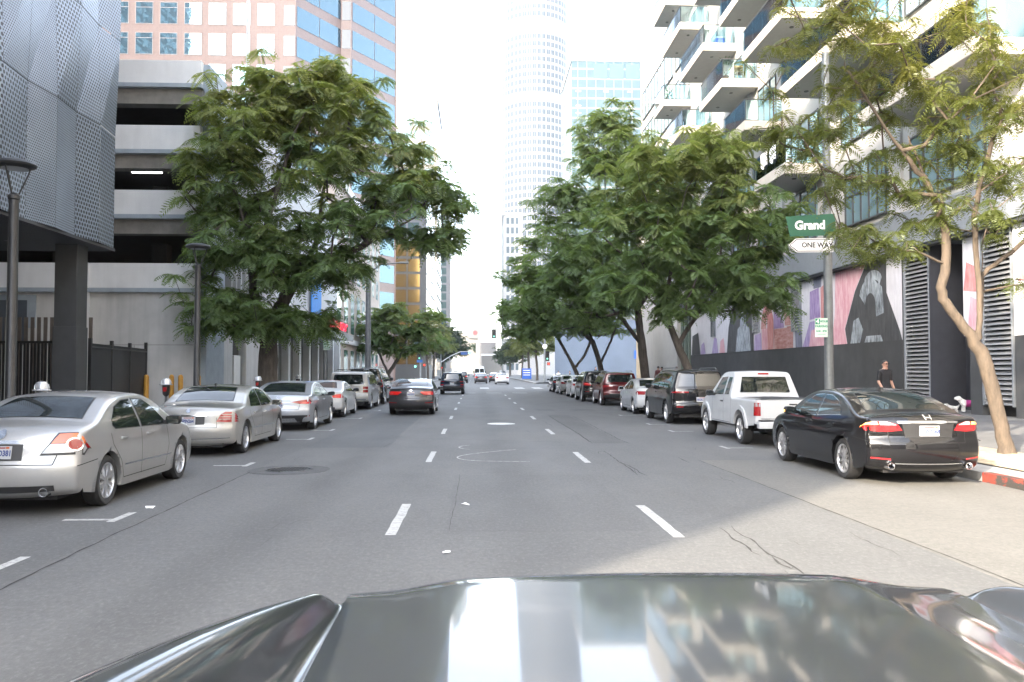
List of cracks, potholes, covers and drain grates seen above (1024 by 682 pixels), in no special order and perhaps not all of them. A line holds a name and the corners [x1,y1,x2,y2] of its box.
manhole cover [247,465,330,475]
crack [719,527,804,574]
crack [544,416,645,475]
